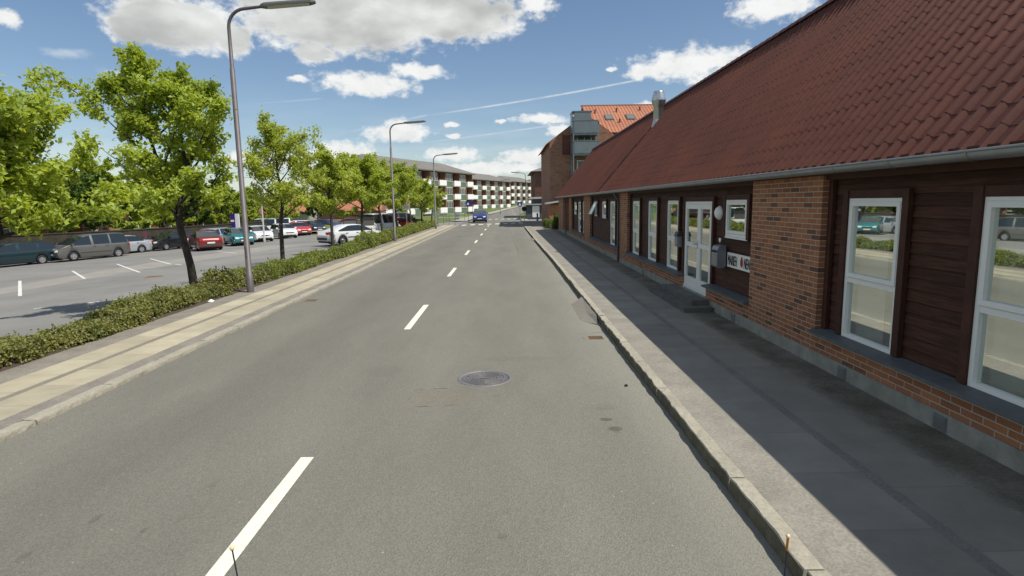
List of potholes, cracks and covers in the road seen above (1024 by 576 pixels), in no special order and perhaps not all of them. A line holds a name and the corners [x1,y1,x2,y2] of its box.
manhole cover [458,370,511,387]
